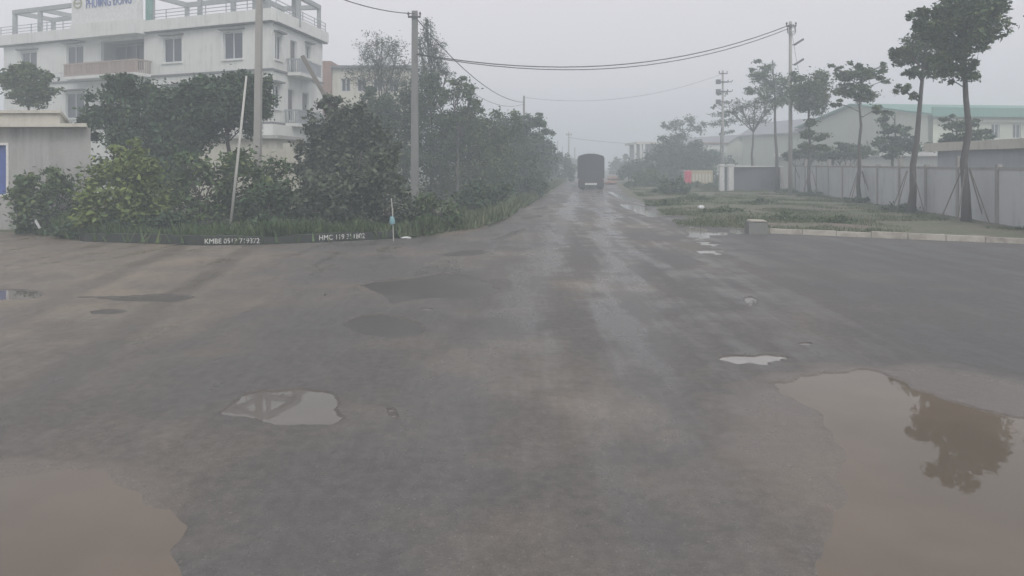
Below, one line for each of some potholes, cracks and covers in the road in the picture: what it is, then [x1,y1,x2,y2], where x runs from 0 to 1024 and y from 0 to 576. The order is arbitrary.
pothole [717,354,790,365]
pothole [385,405,401,421]
pothole [217,387,347,425]
